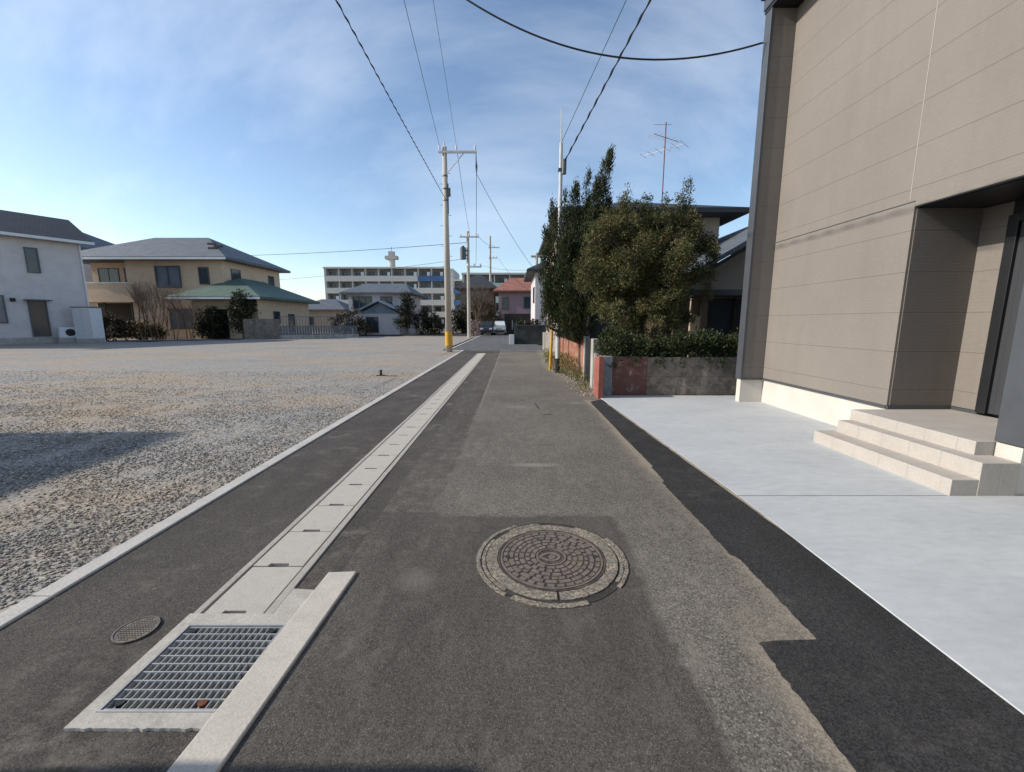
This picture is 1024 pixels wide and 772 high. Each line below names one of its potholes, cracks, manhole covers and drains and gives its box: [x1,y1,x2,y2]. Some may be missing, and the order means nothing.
manhole cover [476,523,629,609]
manhole cover [110,616,161,645]
